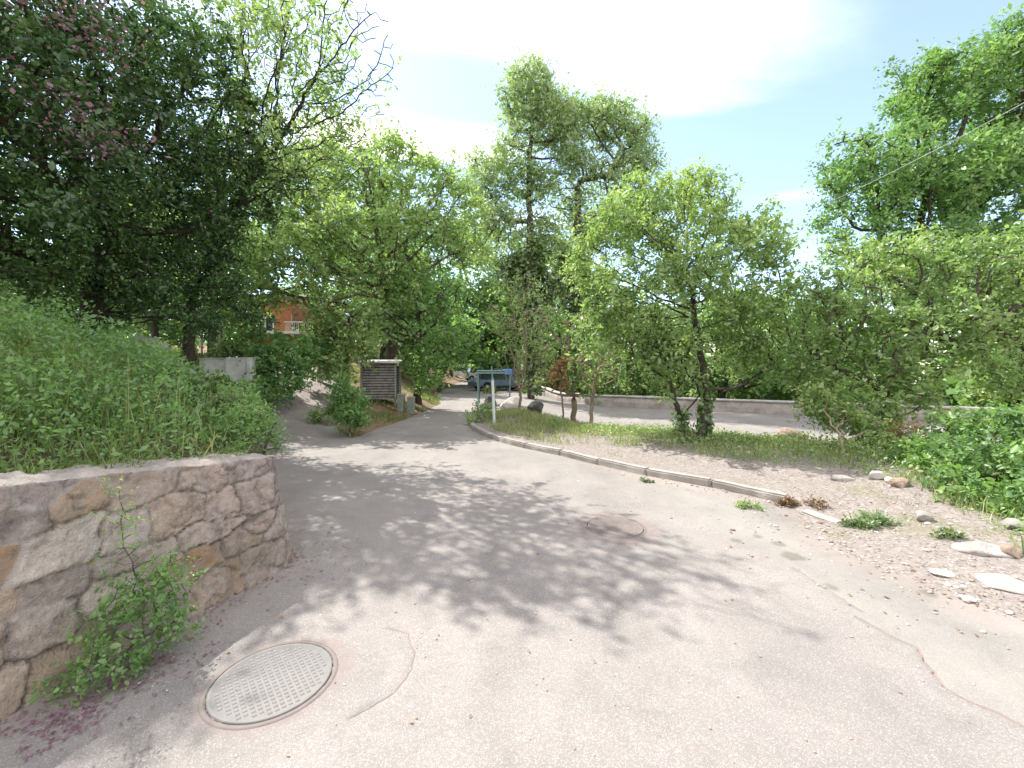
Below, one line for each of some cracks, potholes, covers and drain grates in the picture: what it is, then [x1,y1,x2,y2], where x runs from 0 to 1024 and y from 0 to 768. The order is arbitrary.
manhole cover [585,516,647,539]
crack [789,567,1024,732]
manhole cover [198,640,338,731]
crack [346,625,424,724]
